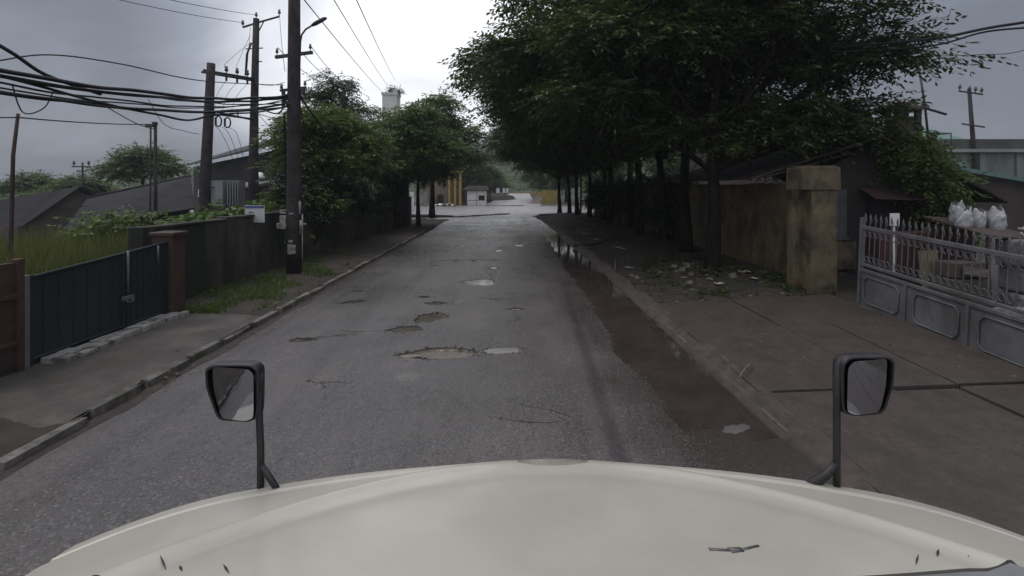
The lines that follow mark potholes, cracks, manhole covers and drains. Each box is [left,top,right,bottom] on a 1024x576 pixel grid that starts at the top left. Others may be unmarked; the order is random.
pothole [413,311,450,323]
crack [499,404,565,423]
pothole [384,325,425,333]
pothole [462,278,495,286]
pothole [393,345,484,360]
